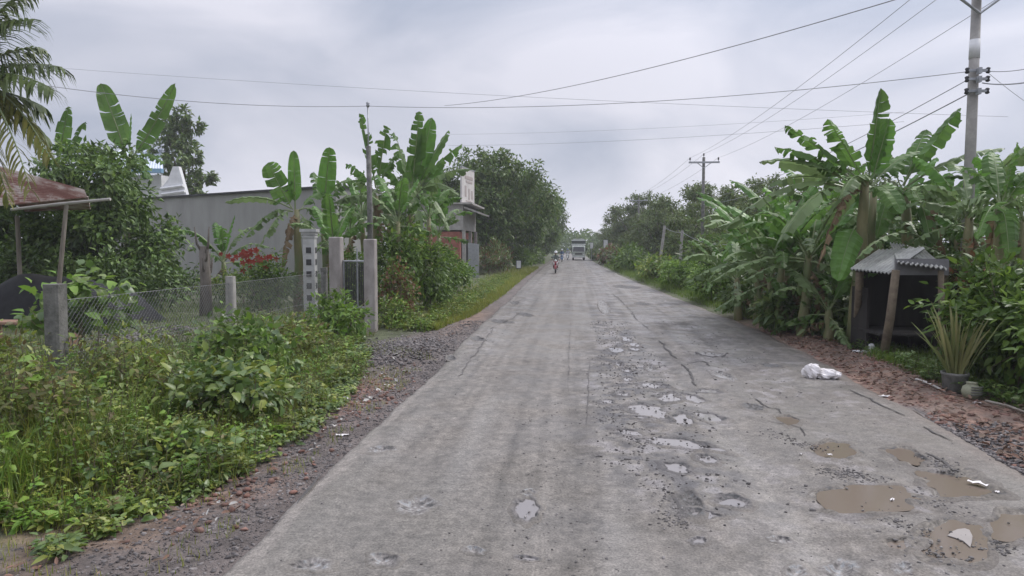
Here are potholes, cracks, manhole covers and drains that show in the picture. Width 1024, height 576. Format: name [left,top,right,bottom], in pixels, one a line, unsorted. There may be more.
pothole [633,435,744,457]
crack [850,389,954,470]
pothole [674,391,712,405]
pothole [605,426,652,438]
crack [457,310,523,377]
pothole [706,491,759,512]
pothole [653,460,699,477]
pothole [806,482,935,521]
pothole [904,466,1021,503]
pothole [877,443,935,471]
pothole [770,414,805,429]
pothole [664,410,697,429]
